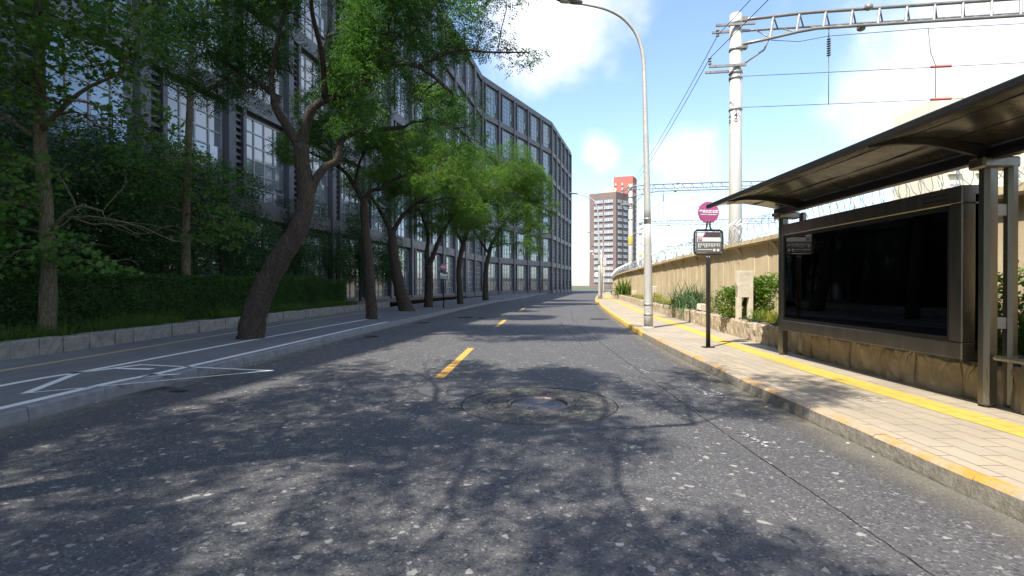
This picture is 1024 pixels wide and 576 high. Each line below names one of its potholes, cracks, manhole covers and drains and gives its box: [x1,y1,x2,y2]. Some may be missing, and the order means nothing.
manhole cover [508,396,570,412]
